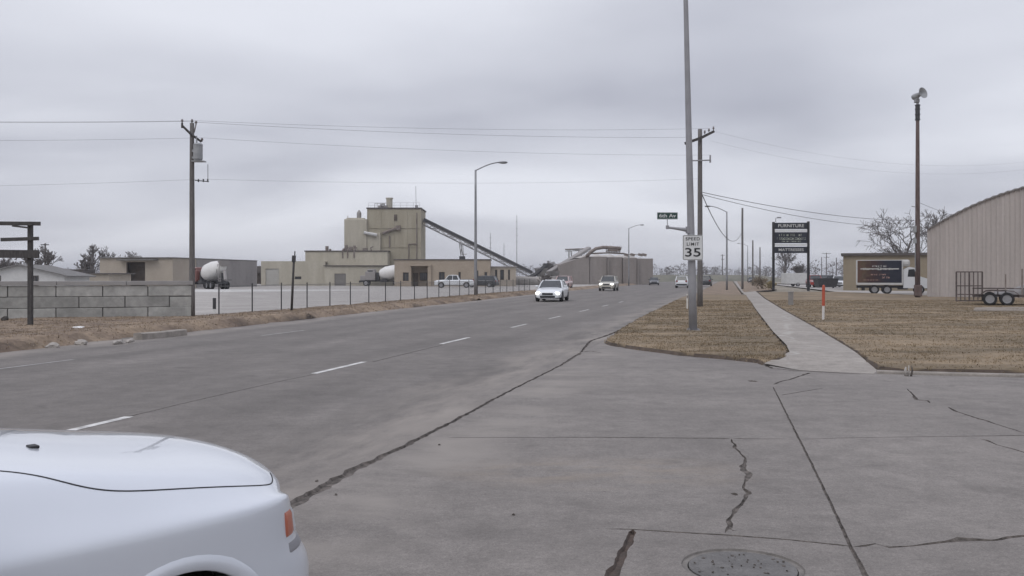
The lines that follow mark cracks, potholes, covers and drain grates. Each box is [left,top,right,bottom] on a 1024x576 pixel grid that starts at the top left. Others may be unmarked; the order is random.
manhole cover [681,549,805,576]
crack [290,331,617,508]
crack [948,407,1023,452]
crack [725,439,753,533]
